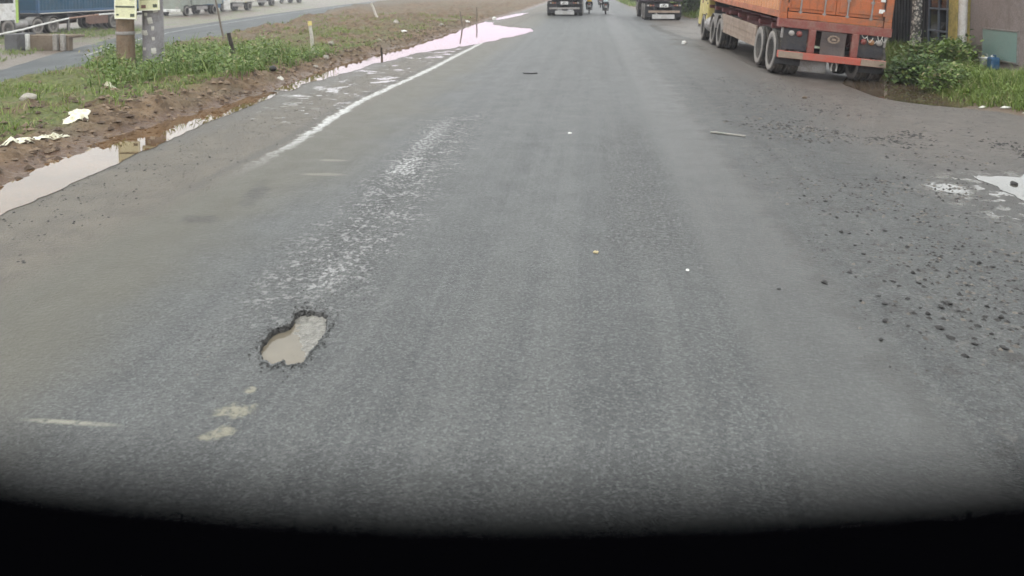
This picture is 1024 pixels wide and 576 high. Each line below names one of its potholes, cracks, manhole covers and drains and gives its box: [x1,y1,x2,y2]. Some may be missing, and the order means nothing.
pothole [248,301,339,377]
